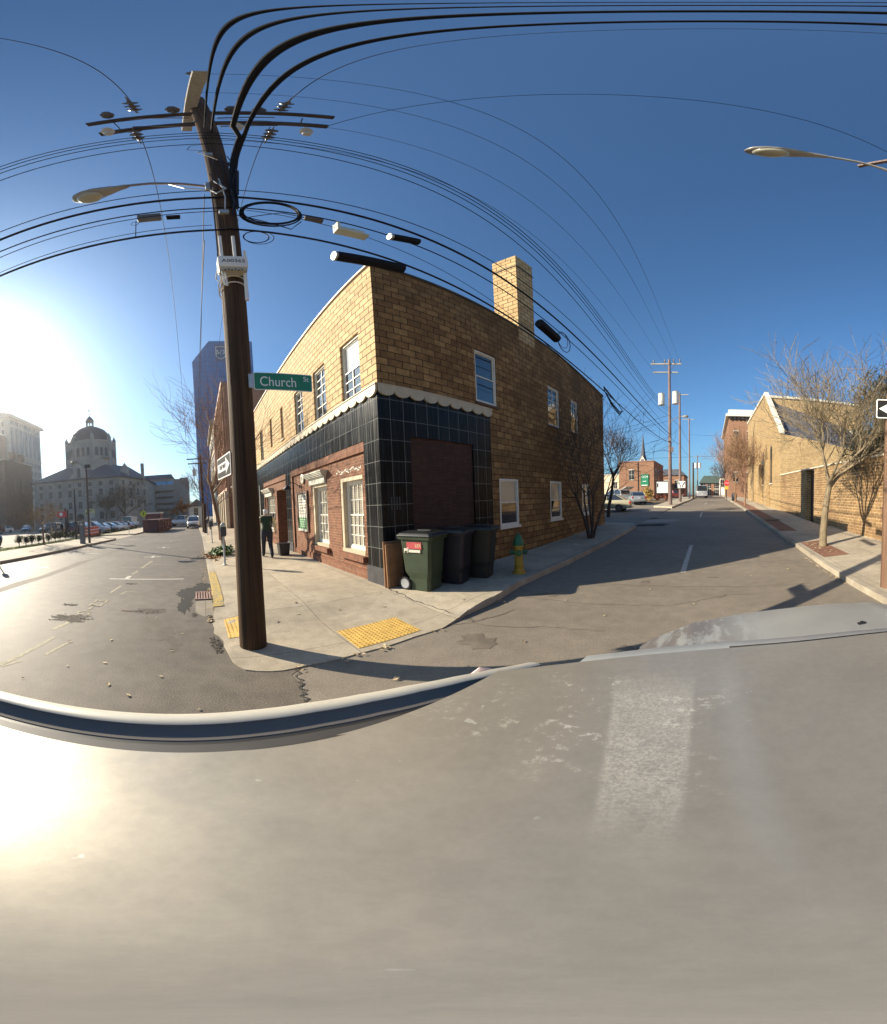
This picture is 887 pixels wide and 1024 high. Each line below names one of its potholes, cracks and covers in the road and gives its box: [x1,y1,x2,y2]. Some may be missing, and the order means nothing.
drain grate [195,591,212,600]
